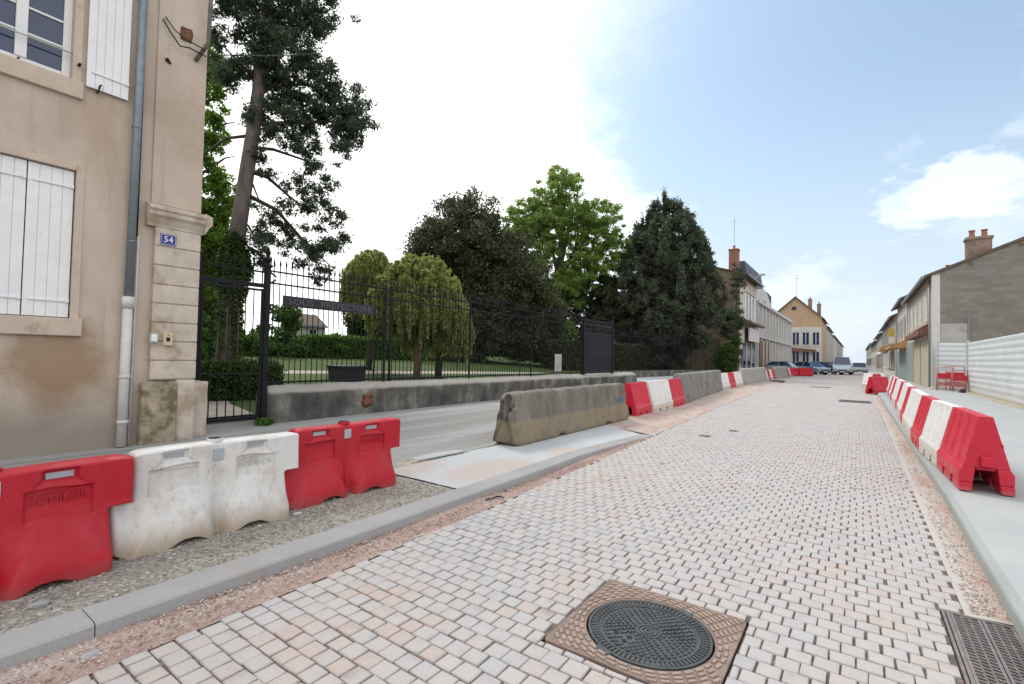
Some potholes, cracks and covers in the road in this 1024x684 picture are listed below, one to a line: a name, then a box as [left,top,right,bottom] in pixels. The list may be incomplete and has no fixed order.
manhole cover [545,580,746,684]
drain grate [941,609,1024,684]
